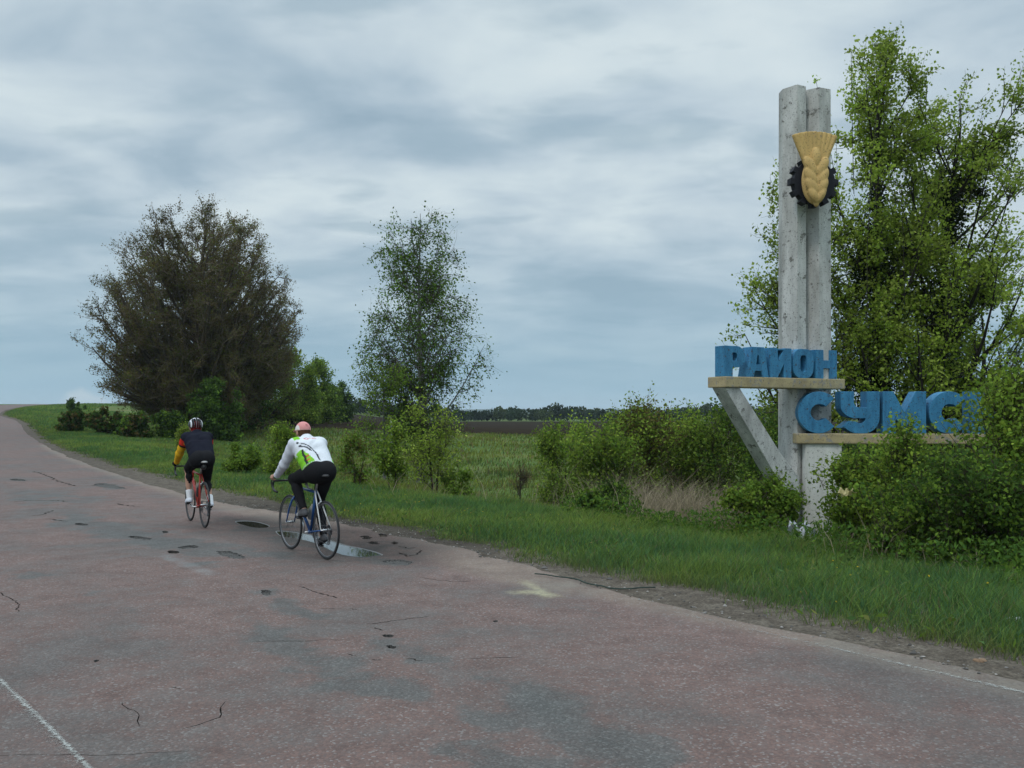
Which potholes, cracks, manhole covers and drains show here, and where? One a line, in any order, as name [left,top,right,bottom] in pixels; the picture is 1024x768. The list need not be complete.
crack [17,472,75,521]
pothole [216,551,245,559]
crack [302,587,428,630]
